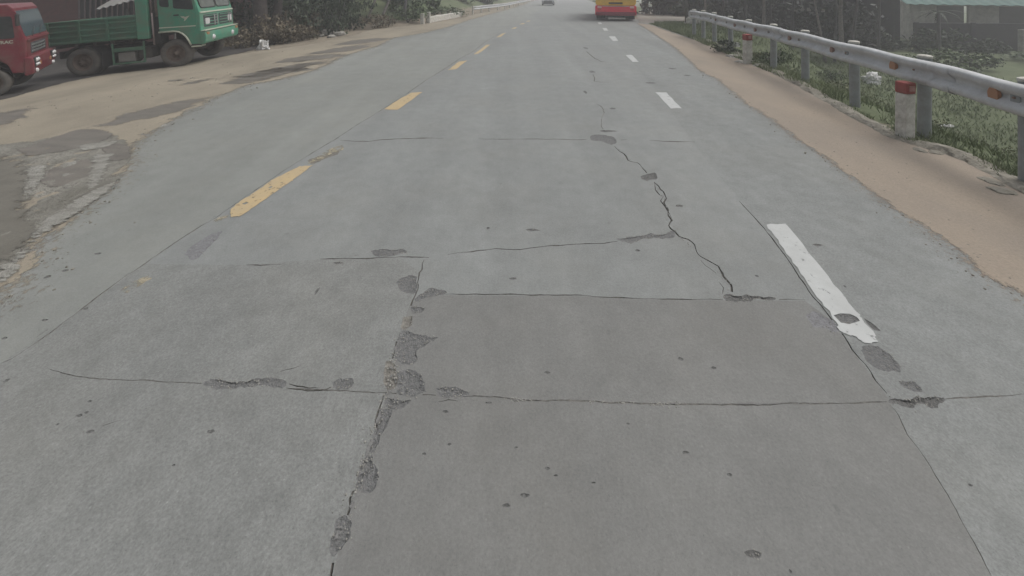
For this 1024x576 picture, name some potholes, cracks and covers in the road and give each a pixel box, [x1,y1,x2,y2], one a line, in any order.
crack [615,147,733,294]
pothole [590,134,617,145]
pothole [383,361,398,391]
pothole [889,396,945,409]
crack [327,256,429,576]
pothole [203,378,287,390]
pothole [861,345,901,373]
pothole [395,369,426,397]
pothole [395,330,438,365]
